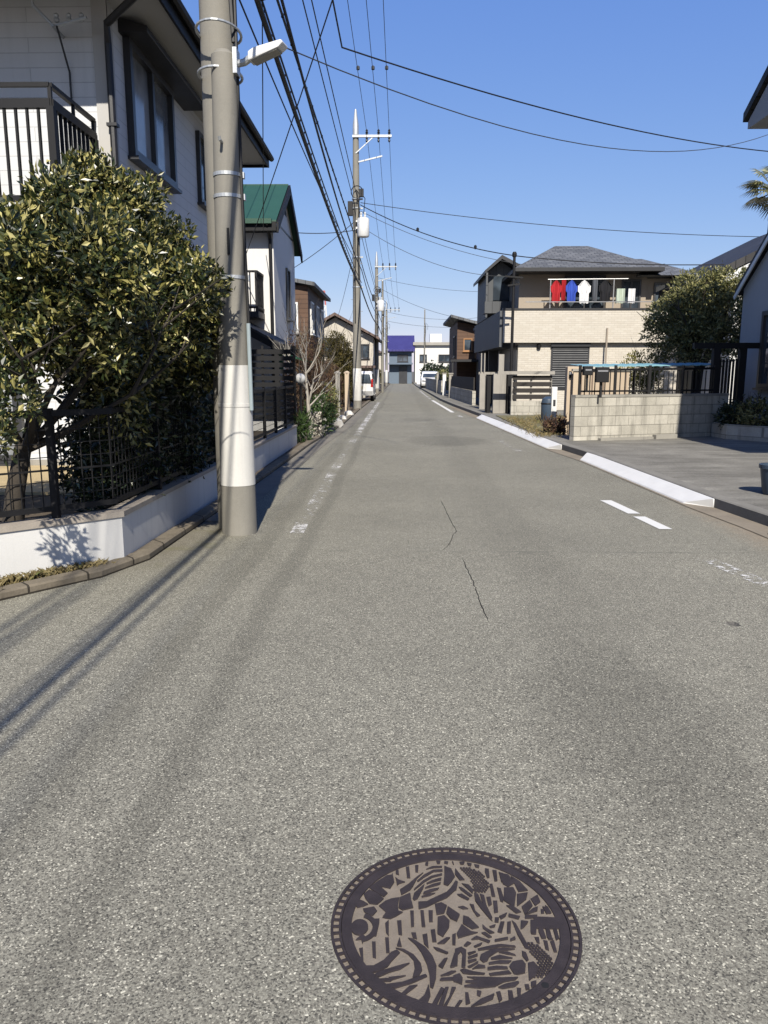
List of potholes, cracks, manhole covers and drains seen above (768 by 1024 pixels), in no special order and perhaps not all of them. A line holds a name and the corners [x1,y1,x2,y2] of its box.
manhole cover [331,847,582,1024]
crack [442,503,500,627]
